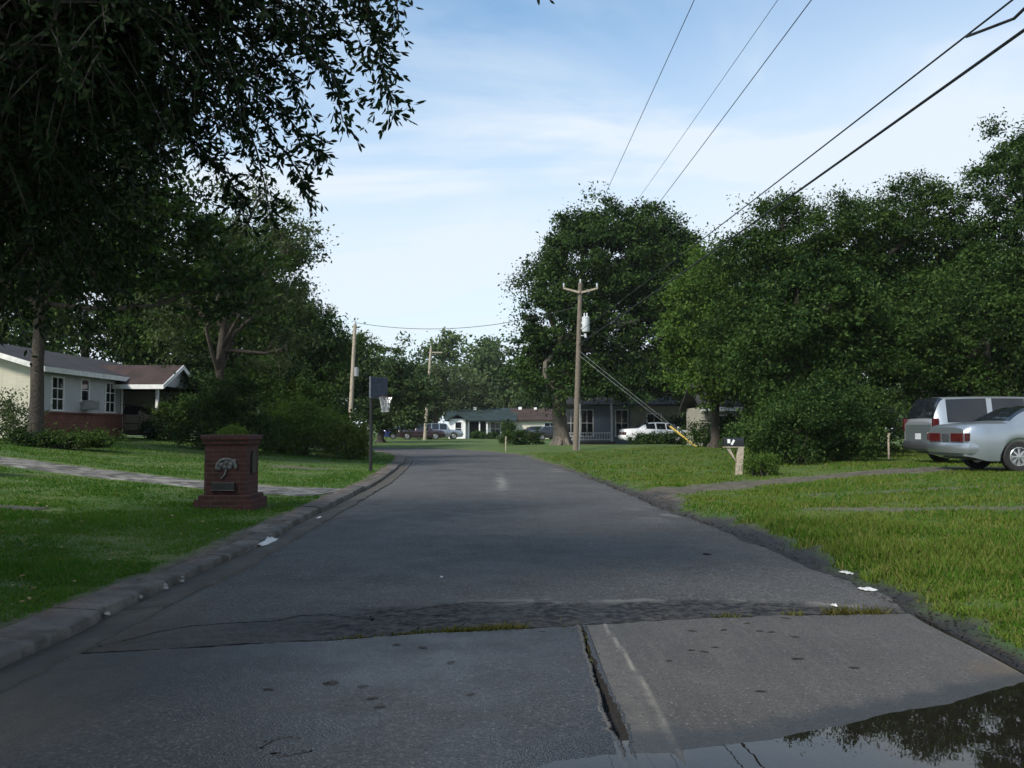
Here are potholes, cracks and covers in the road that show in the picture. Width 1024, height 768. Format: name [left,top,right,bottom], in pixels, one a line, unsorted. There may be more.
crack [81,601,913,768]
